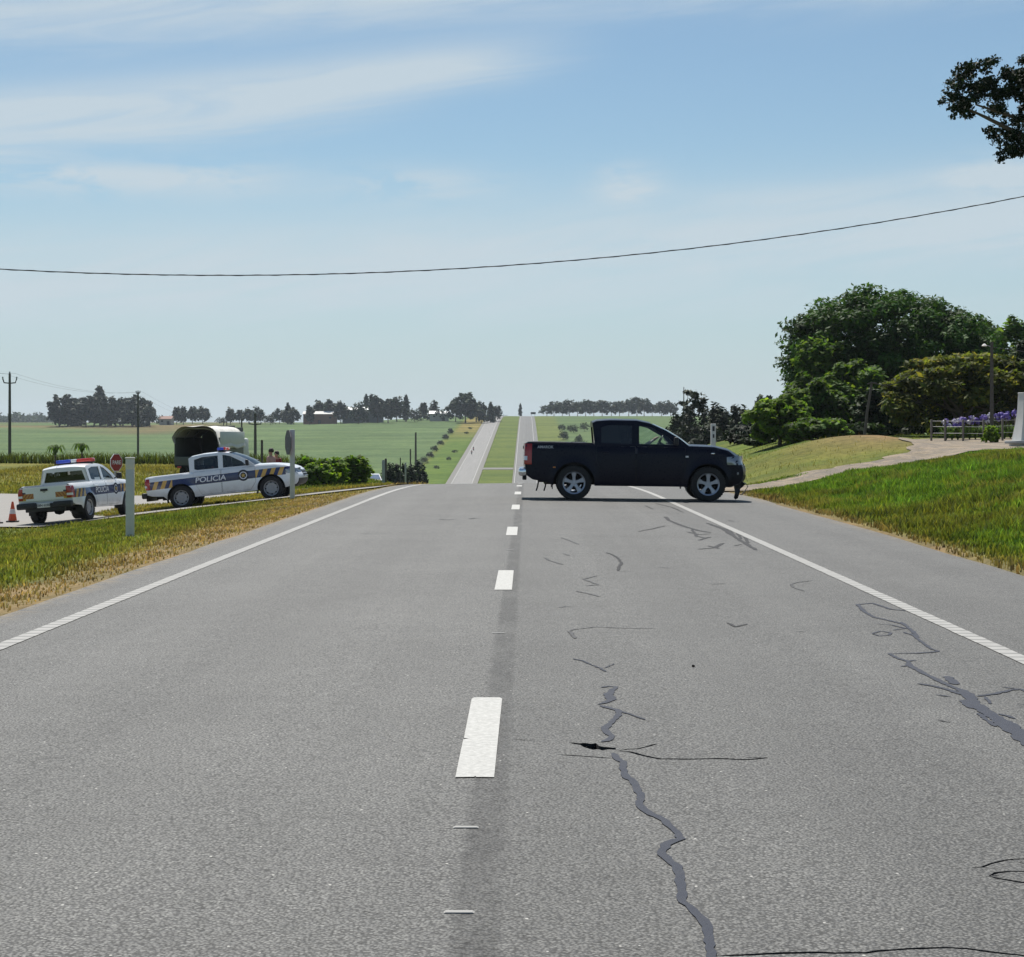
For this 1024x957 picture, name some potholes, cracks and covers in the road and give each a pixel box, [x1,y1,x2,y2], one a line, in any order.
crack [567,626,619,638]
crack [563,552,630,607]
pothole [569,742,616,750]
crack [642,503,757,550]
crack [972,858,1024,883]
crack [558,744,765,760]
crack [721,947,1024,956]
